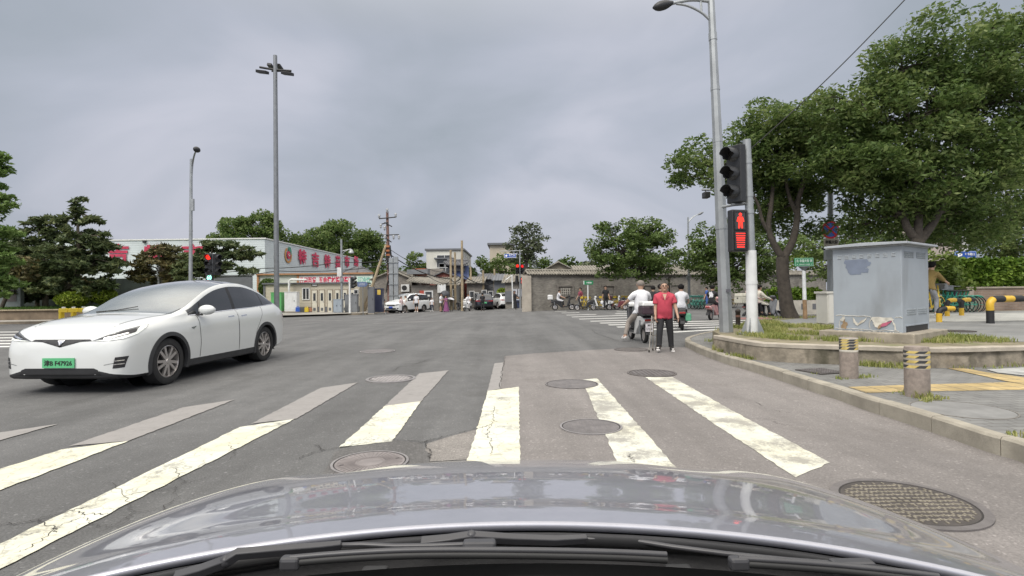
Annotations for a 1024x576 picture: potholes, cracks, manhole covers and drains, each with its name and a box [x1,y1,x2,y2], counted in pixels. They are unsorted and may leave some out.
manhole cover [545,379,598,389]
manhole cover [365,375,416,383]
manhole cover [627,369,677,377]
manhole cover [560,419,622,435]
manhole cover [830,478,995,532]
manhole cover [330,450,409,473]
